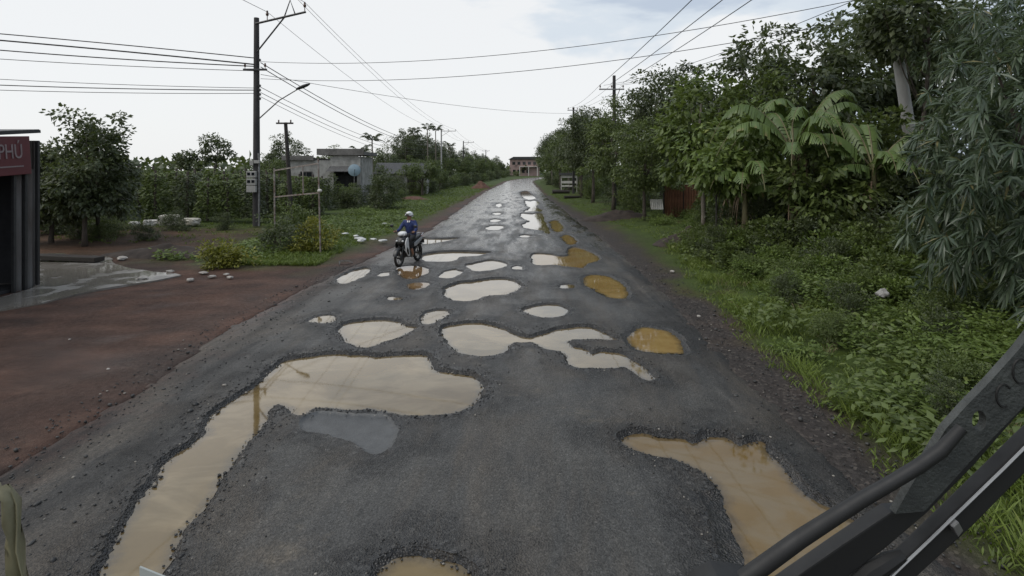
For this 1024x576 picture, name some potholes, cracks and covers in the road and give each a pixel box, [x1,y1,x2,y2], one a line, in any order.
pothole [305,314,339,323]
pothole [437,268,465,278]
pothole [465,259,509,271]
pothole [519,212,553,234]
pothole [529,246,602,268]
pothole [616,426,889,576]
pothole [334,317,420,348]
pothole [418,308,452,324]
pothole [579,273,632,299]
pothole [334,266,372,284]
pothole [521,302,571,318]
pothole [523,200,544,212]
